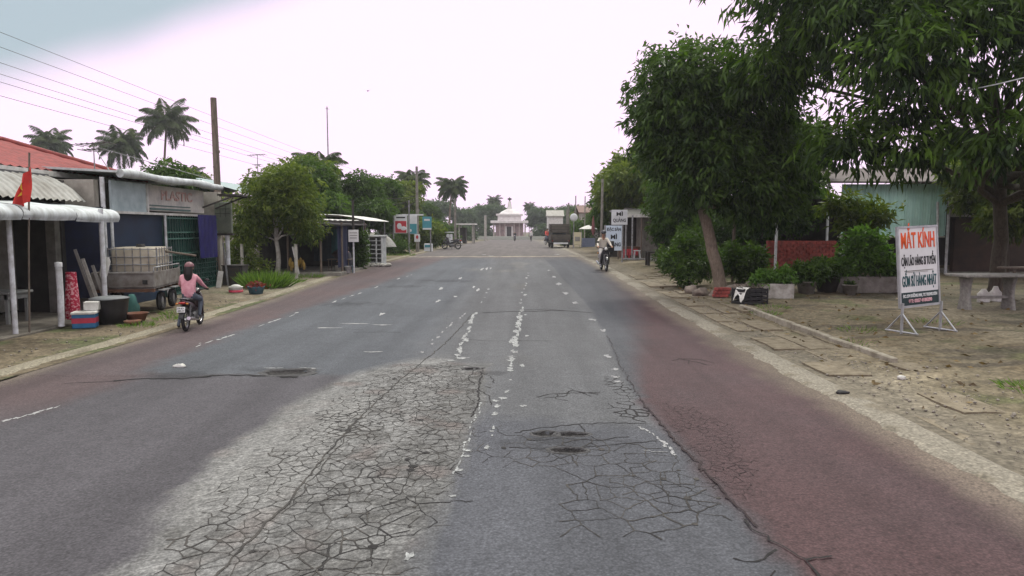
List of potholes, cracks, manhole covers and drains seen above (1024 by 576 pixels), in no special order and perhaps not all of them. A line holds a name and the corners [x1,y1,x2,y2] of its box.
crack [658,402,762,498]
pothole [257,368,318,377]
crack [733,519,832,576]
crack [446,376,732,539]
crack [155,309,592,576]
